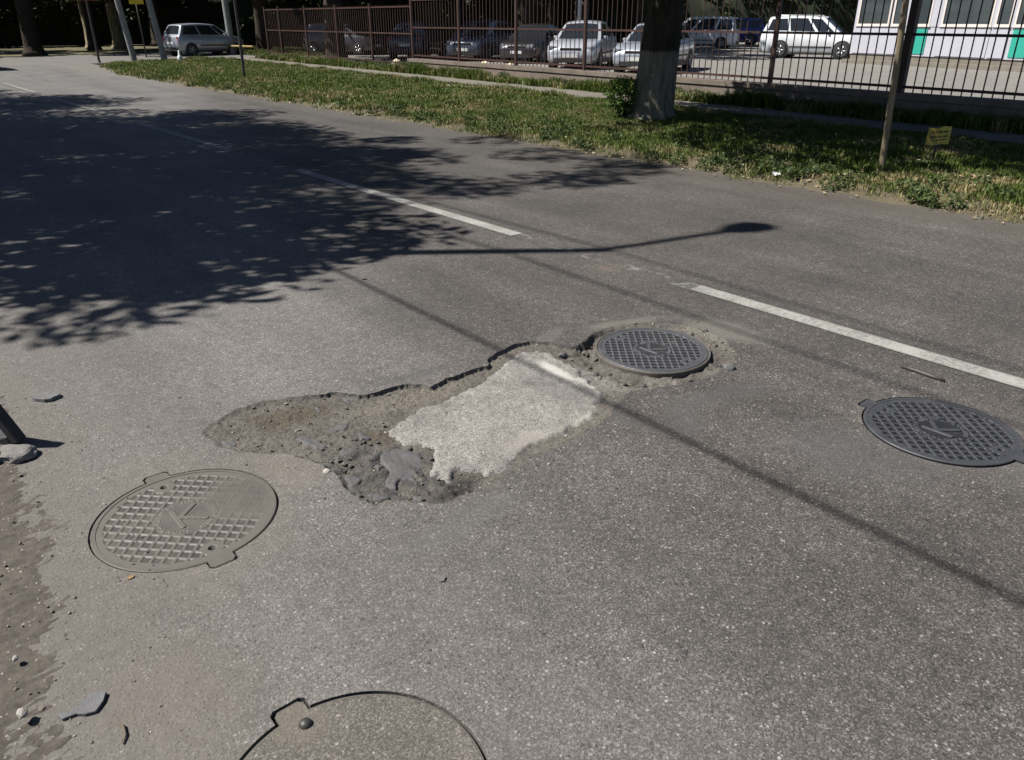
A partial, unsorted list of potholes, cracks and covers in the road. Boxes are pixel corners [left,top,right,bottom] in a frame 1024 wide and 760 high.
manhole cover [591,327,712,380]
manhole cover [860,398,1024,468]
pothole [201,323,737,506]
manhole cover [243,694,487,760]
manhole cover [90,469,279,573]
